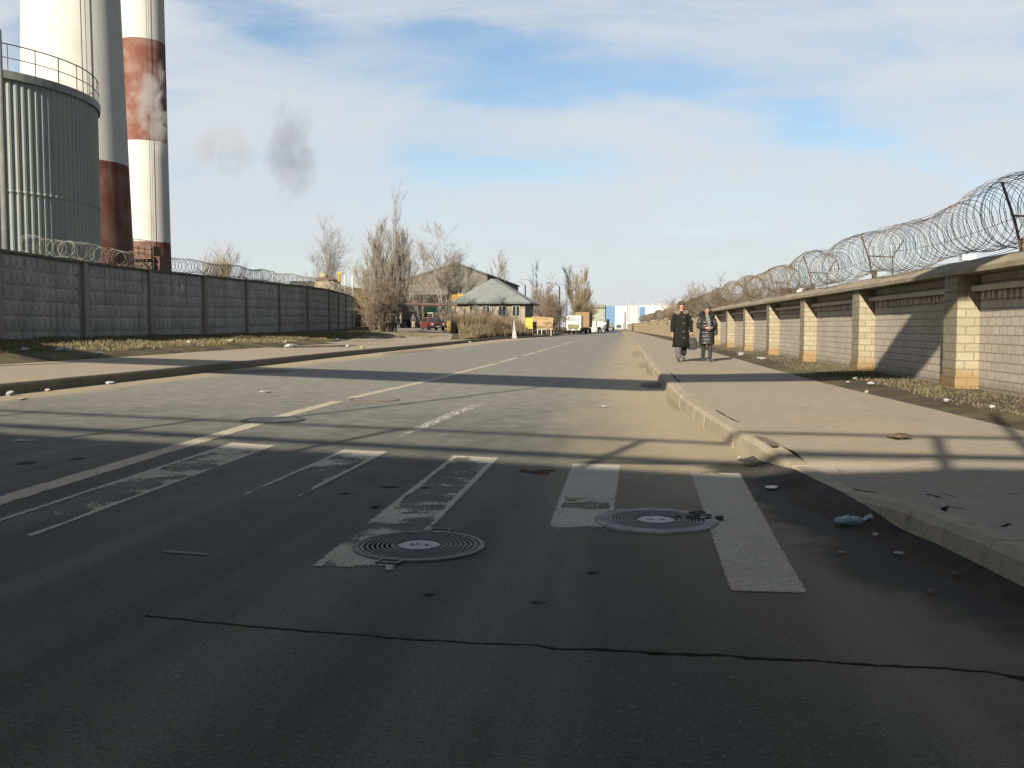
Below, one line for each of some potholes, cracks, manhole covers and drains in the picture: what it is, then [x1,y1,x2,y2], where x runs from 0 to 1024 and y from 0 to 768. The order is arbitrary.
manhole cover [594,508,719,534]
crack [142,615,1024,682]
manhole cover [352,528,485,566]
